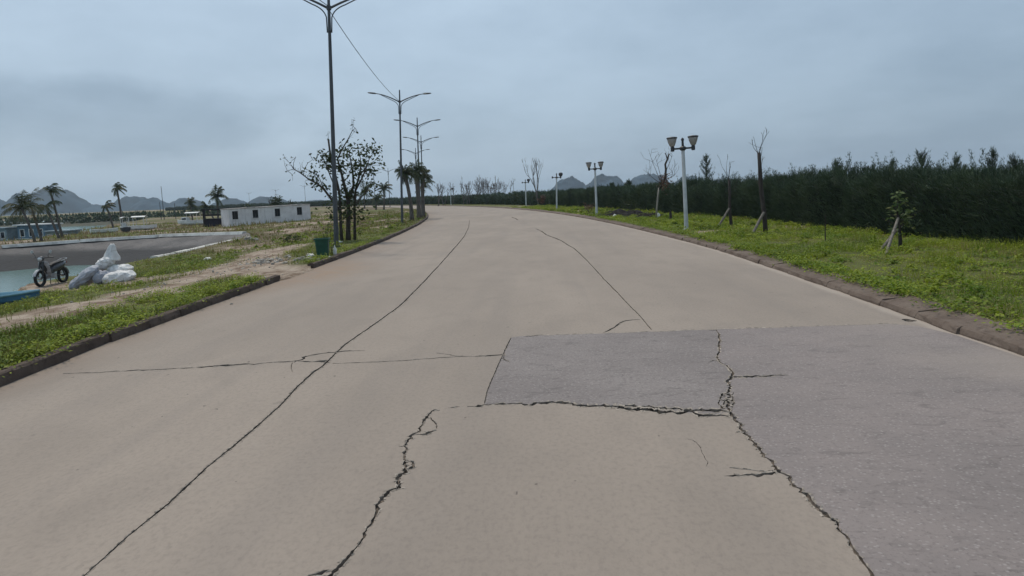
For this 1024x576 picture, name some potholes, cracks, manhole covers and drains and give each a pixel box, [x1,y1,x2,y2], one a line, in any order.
crack [63,336,729,576]
crack [535,228,651,333]
